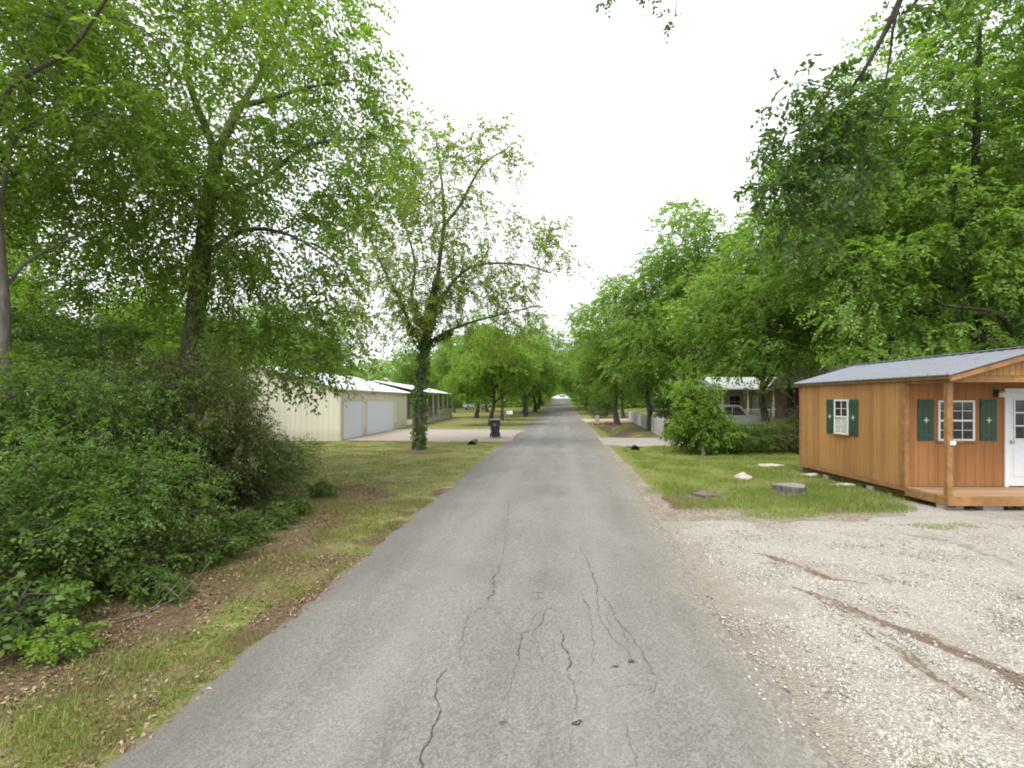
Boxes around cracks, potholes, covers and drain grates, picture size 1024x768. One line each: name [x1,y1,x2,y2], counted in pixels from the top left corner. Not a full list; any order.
crack [506,592,578,753]
crack [419,503,509,768]
crack [580,548,657,693]
